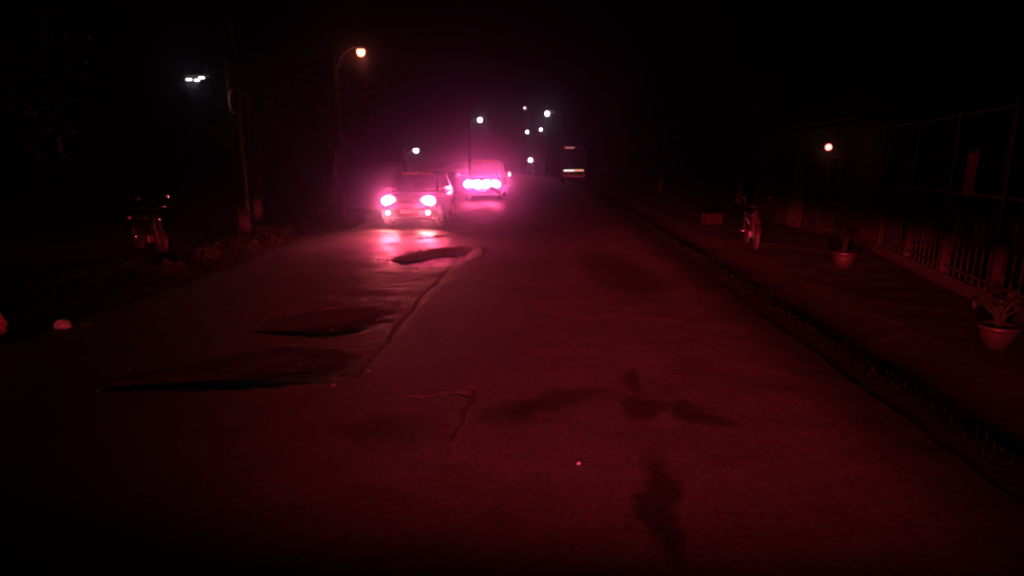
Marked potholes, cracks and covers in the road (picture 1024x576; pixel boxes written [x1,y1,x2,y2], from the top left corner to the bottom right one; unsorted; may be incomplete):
pothole [392,247,479,267]
pothole [247,307,402,338]
pothole [98,346,368,393]
crack [413,386,479,442]
